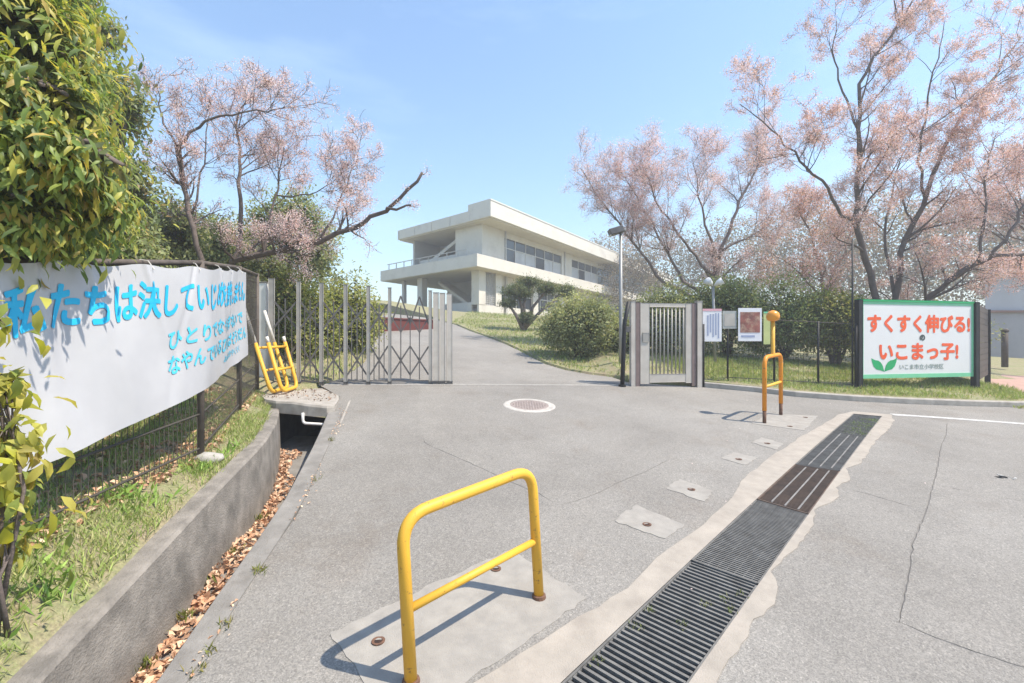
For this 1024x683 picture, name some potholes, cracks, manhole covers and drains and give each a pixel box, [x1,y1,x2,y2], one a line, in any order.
drain grate [692,500,808,585]
drain grate [796,431,865,471]
manhole cover [503,399,555,412]
drain grate [757,464,840,515]
drain grate [562,561,758,683]
crack [865,425,1024,668]
drain grate [833,414,882,437]
